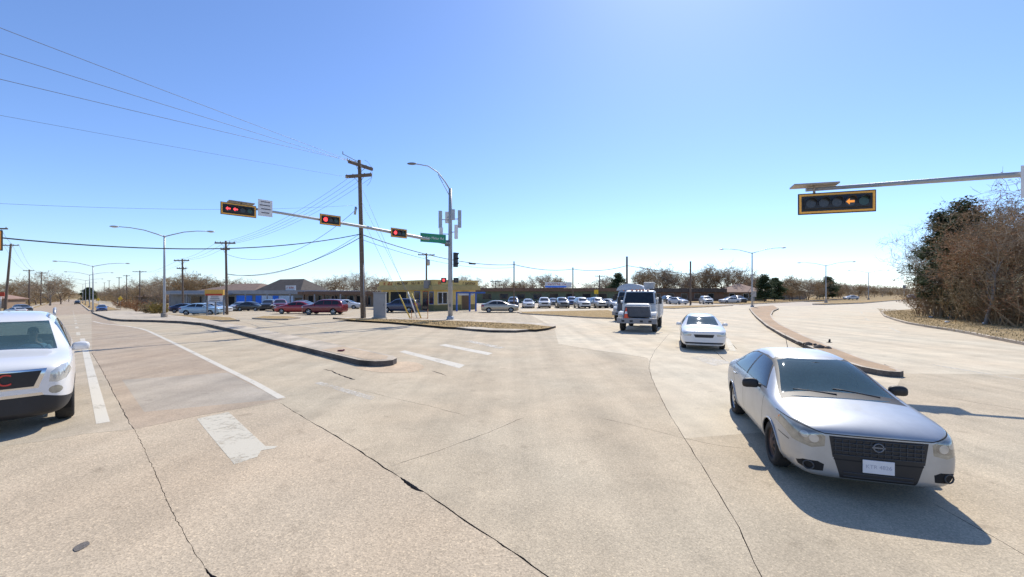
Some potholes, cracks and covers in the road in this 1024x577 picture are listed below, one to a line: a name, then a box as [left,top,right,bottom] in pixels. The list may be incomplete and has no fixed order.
crack [135,431,204,565]
crack [284,405,398,476]
crack [423,491,549,577]
